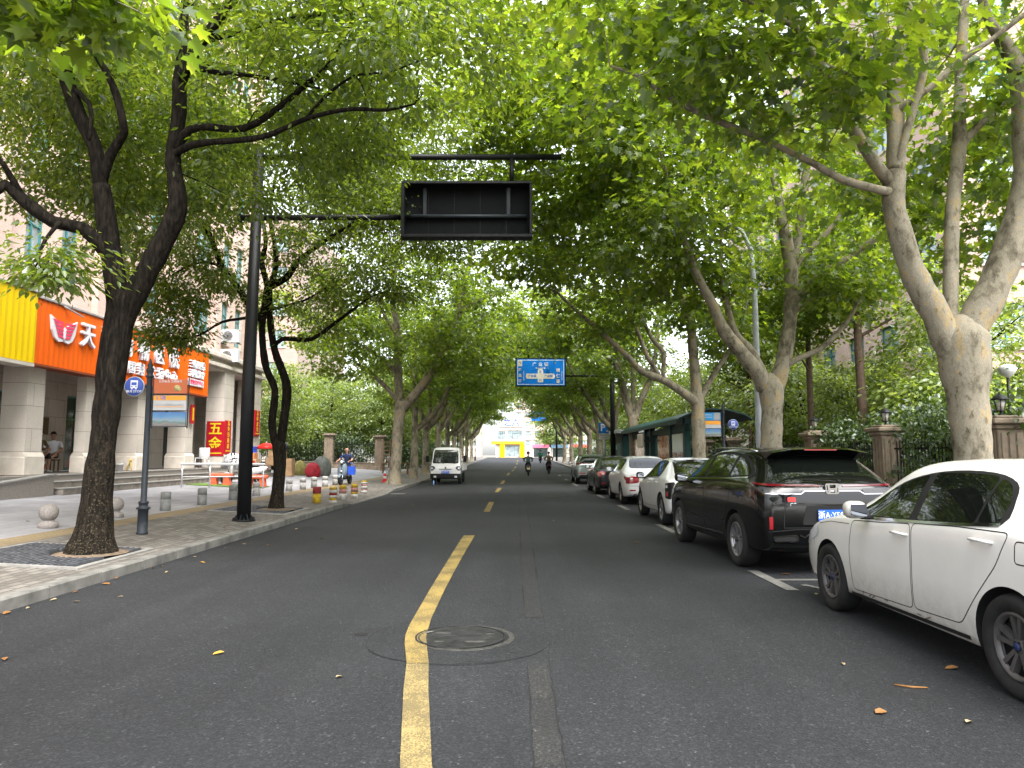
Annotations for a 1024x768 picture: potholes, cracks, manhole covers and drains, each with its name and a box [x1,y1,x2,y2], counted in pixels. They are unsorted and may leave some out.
manhole cover [418,625,515,651]
